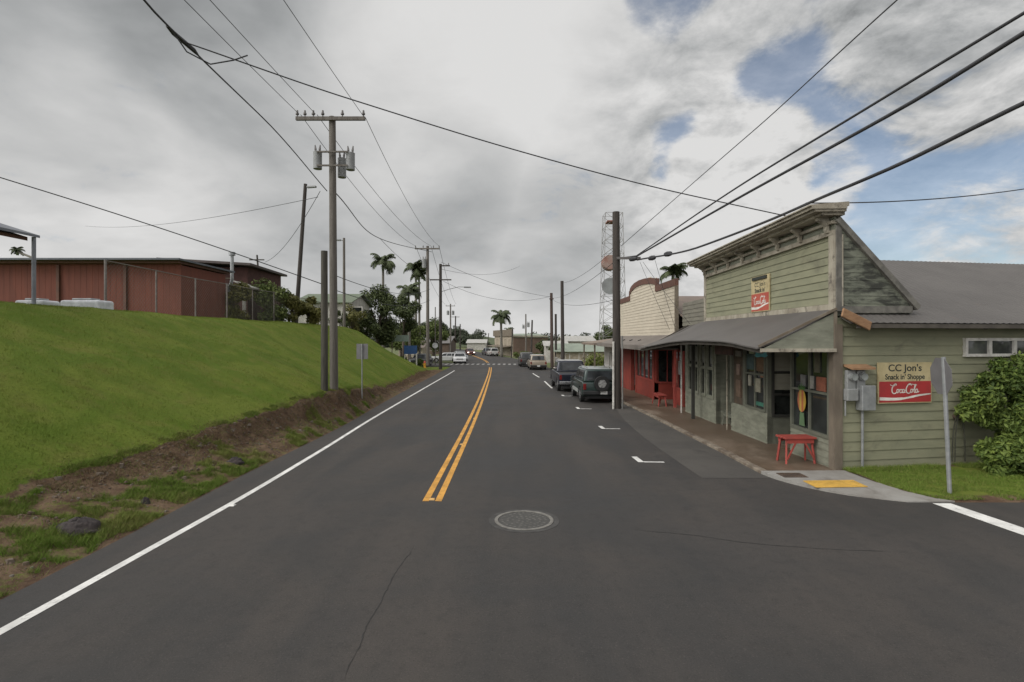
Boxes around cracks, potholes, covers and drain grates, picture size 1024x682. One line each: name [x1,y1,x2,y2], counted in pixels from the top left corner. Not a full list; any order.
manhole cover [489,509,559,533]
crack [344,548,413,678]
